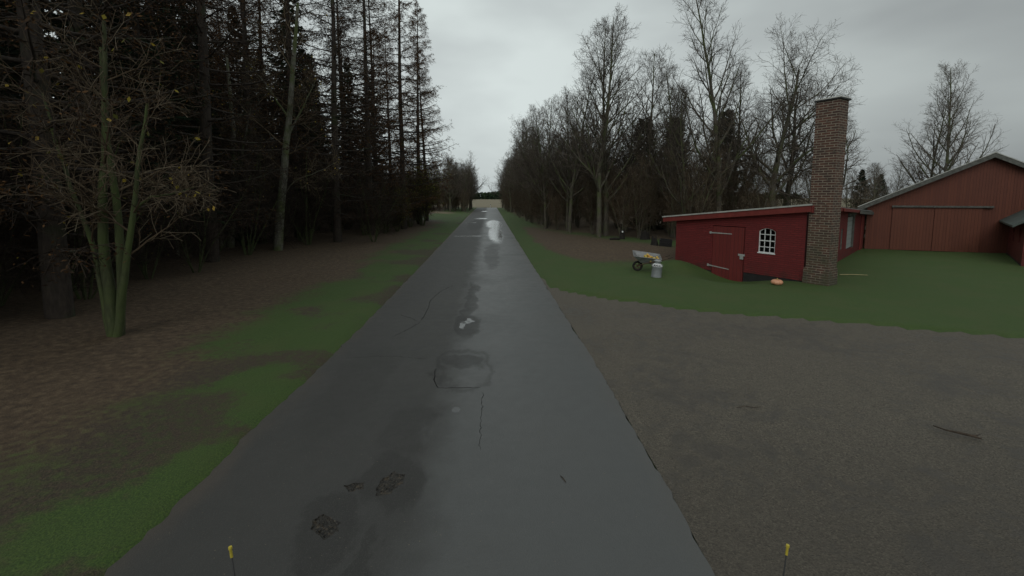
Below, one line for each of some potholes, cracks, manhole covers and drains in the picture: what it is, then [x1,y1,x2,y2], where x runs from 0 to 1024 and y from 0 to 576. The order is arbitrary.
pothole [344,482,364,492]
pothole [376,471,405,497]
pothole [310,514,341,540]
